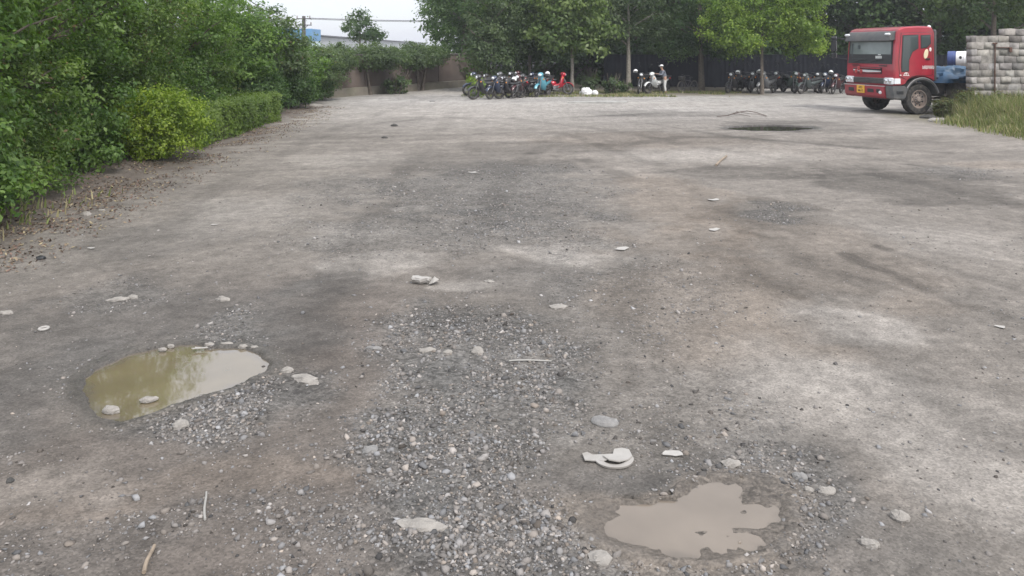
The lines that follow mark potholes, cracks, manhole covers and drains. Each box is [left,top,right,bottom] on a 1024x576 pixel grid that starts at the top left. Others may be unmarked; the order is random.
pothole [572,472,805,570]
pothole [717,124,823,132]
pothole [64,337,286,431]
